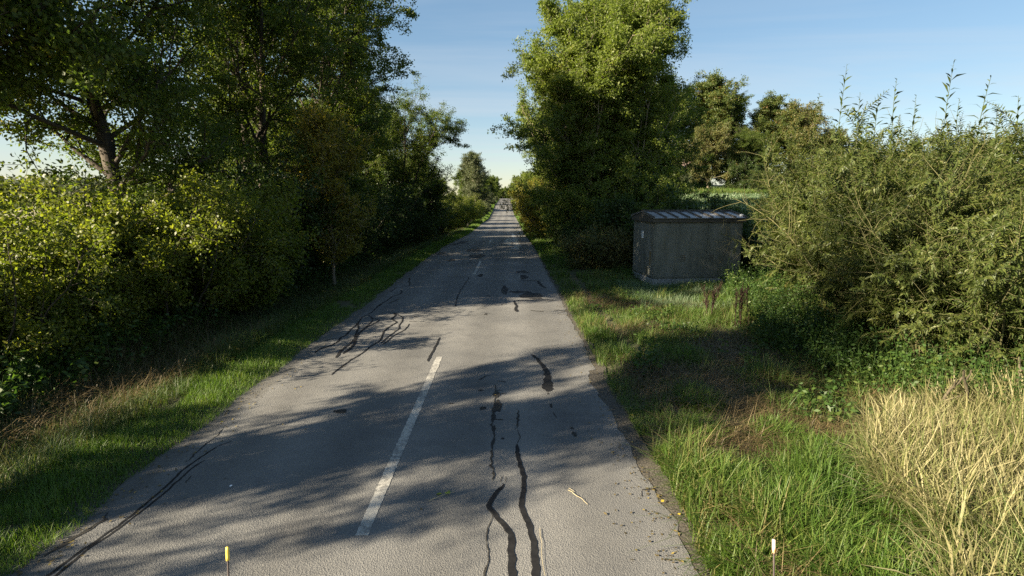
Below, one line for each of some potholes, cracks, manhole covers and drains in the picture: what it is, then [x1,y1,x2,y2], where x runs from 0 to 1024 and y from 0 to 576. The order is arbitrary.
crack [483,513,493,576]
crack [185,430,228,483]
crack [479,375,521,481]
crack [43,513,108,556]
